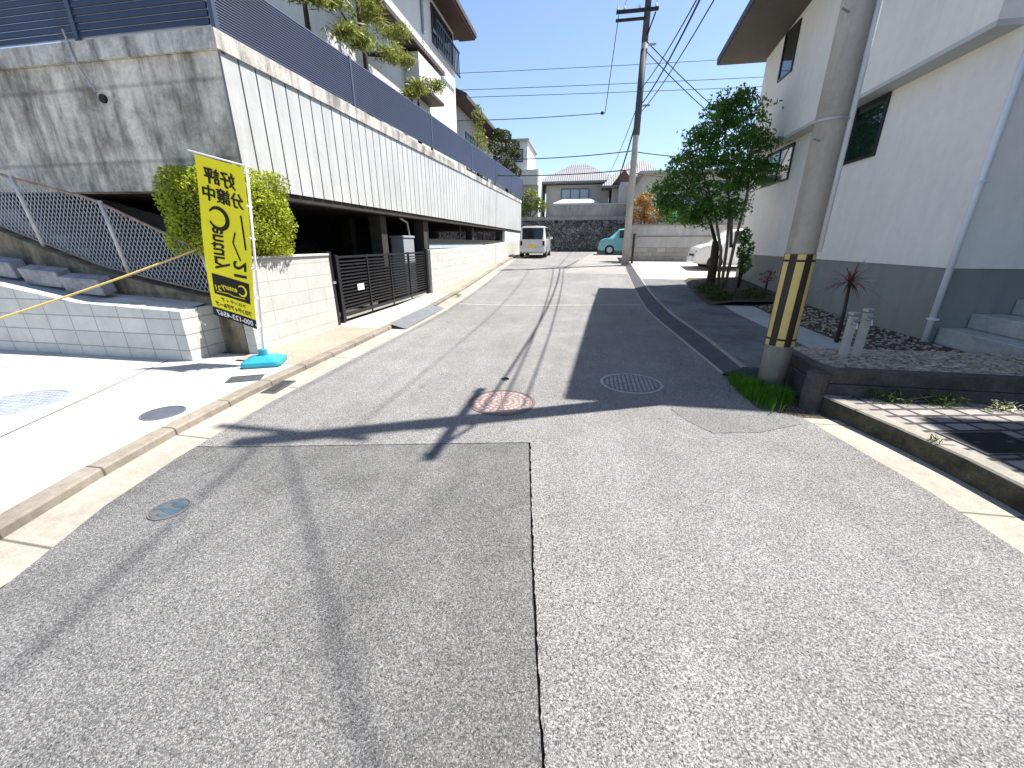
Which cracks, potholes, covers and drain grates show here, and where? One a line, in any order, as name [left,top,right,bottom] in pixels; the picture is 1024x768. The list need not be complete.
manhole cover [0,389,73,415]
manhole cover [600,373,663,394]
manhole cover [468,390,535,416]
manhole cover [138,405,186,421]
drain grate [260,380,296,394]
manhole cover [146,498,192,521]
